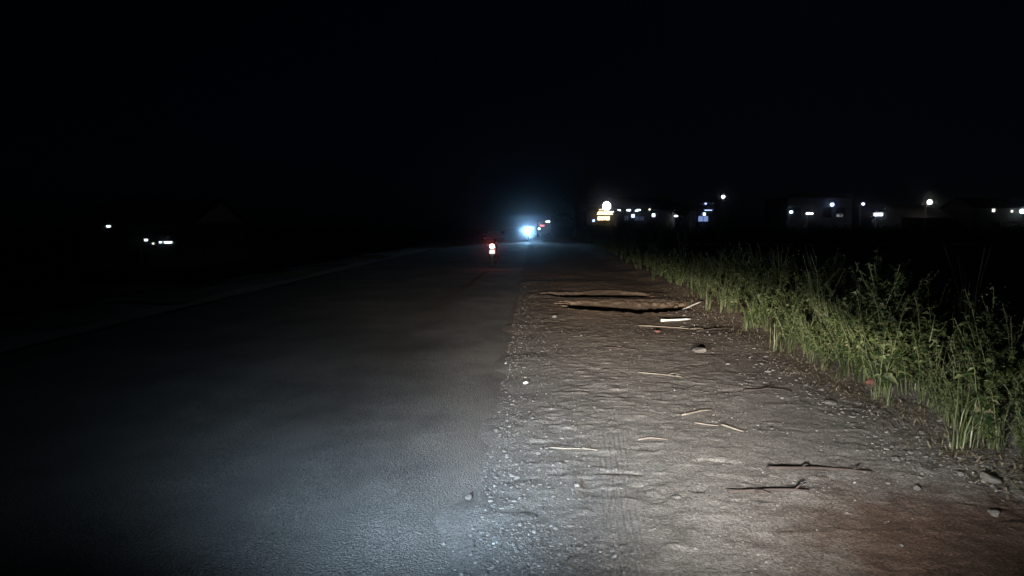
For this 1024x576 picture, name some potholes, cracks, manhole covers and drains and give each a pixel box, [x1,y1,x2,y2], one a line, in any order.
pothole [542,299,706,314]
pothole [532,290,660,298]
